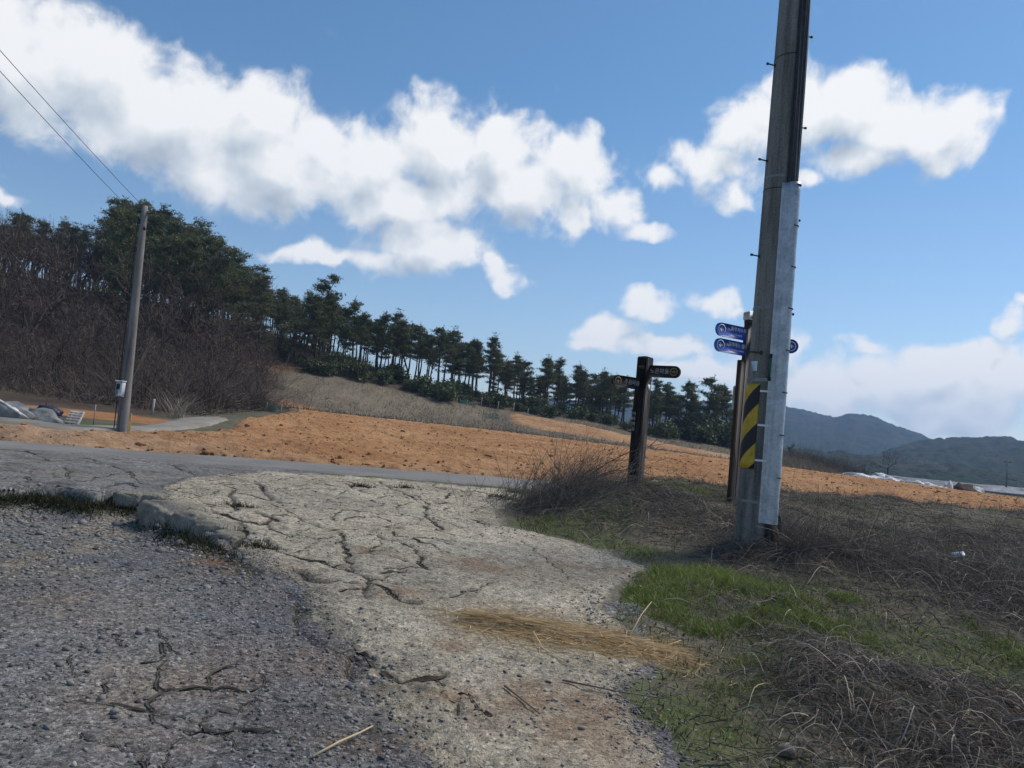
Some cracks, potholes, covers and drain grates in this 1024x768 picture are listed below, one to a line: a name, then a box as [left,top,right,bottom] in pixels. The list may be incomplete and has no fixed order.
crack [171,473,518,717]
crack [1,451,193,489]
crack [70,628,272,768]
